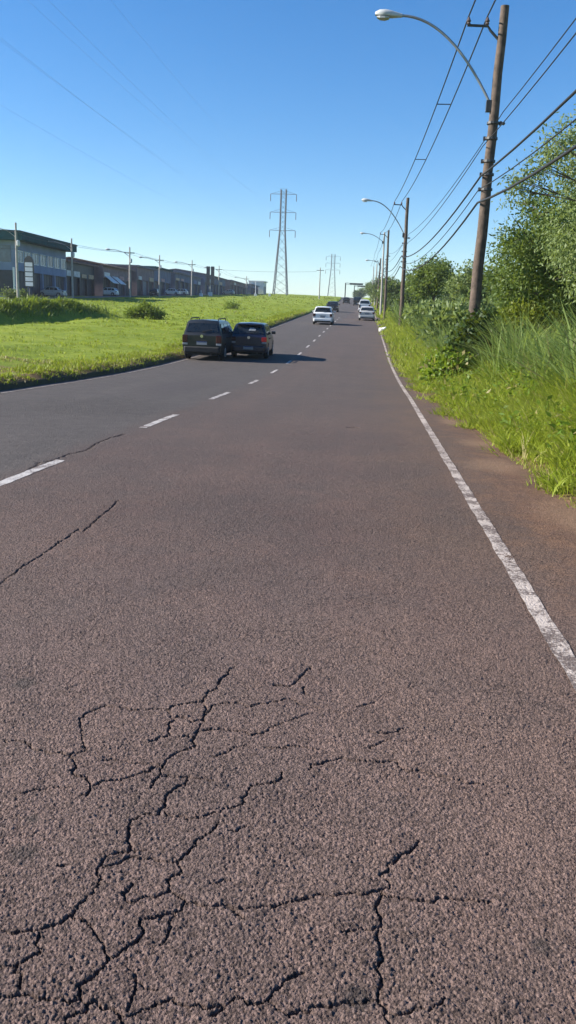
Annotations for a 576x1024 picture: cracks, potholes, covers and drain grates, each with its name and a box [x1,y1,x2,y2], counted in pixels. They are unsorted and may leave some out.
crack [0,500,121,584]
crack [308,728,487,786]
crack [20,786,71,794]
